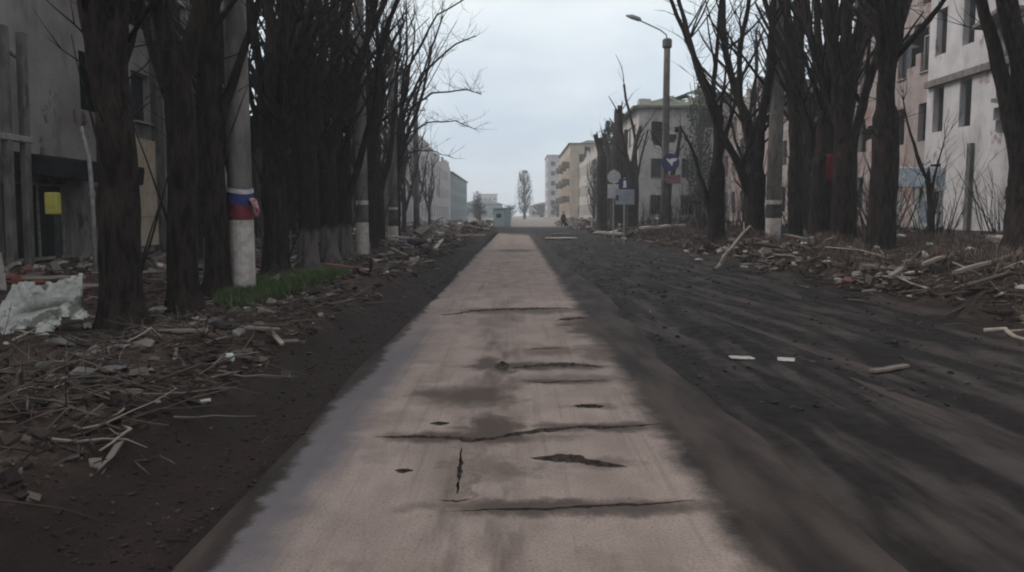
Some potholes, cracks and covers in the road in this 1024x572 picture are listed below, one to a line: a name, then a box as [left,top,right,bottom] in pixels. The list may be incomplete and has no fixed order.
crack [442,307,585,321]
crack [375,423,694,512]
crack [513,348,601,383]
pothole [530,454,628,467]
